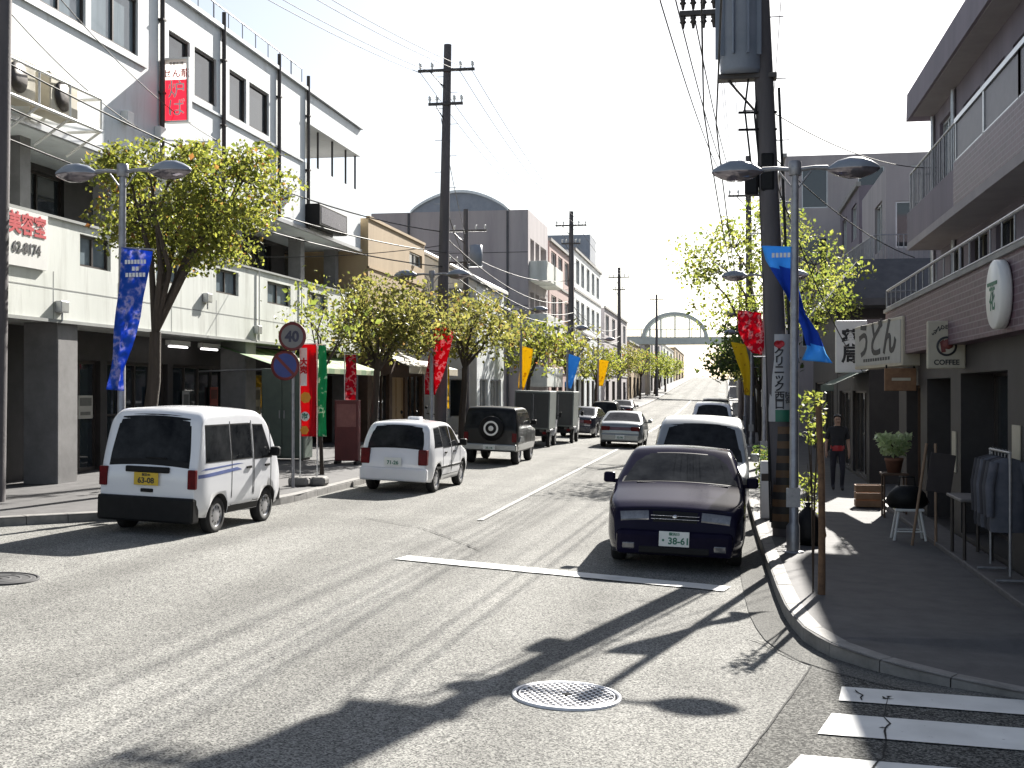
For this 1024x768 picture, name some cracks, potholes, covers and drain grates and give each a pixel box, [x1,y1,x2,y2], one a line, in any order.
crack [855,690,892,768]
manhole cover [0,572,40,586]
manhole cover [512,681,622,711]
